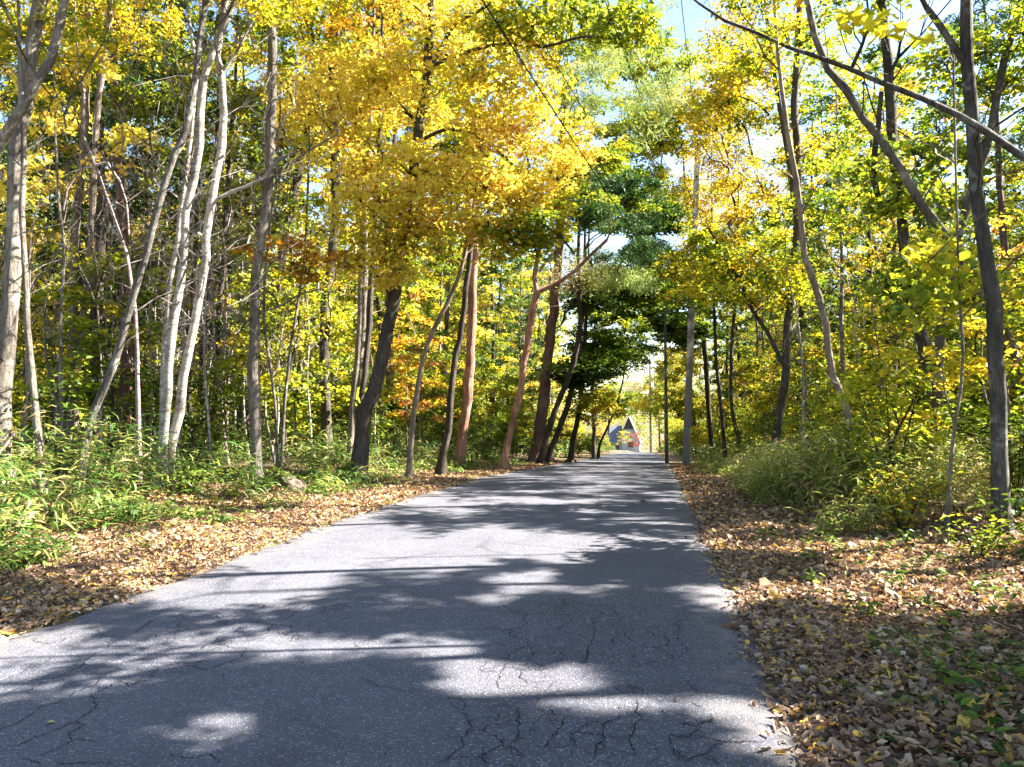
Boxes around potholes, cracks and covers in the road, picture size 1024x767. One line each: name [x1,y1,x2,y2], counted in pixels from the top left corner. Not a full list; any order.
crack [1,598,356,765]
crack [377,593,784,767]
